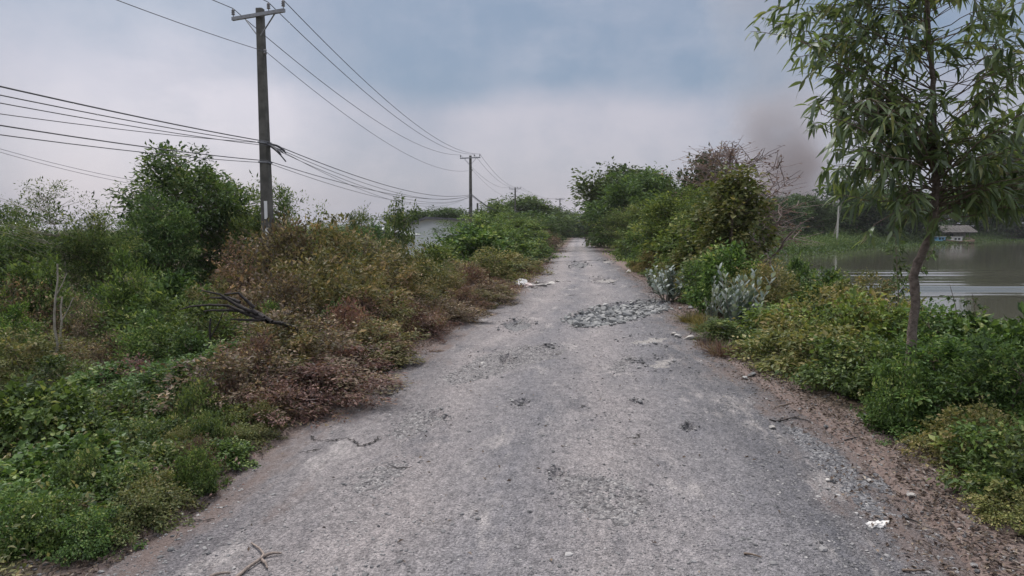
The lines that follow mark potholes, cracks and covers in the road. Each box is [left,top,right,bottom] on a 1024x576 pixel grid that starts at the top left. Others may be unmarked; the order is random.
pothole [568,301,664,328]
pothole [503,319,534,331]
crack [307,435,381,452]
